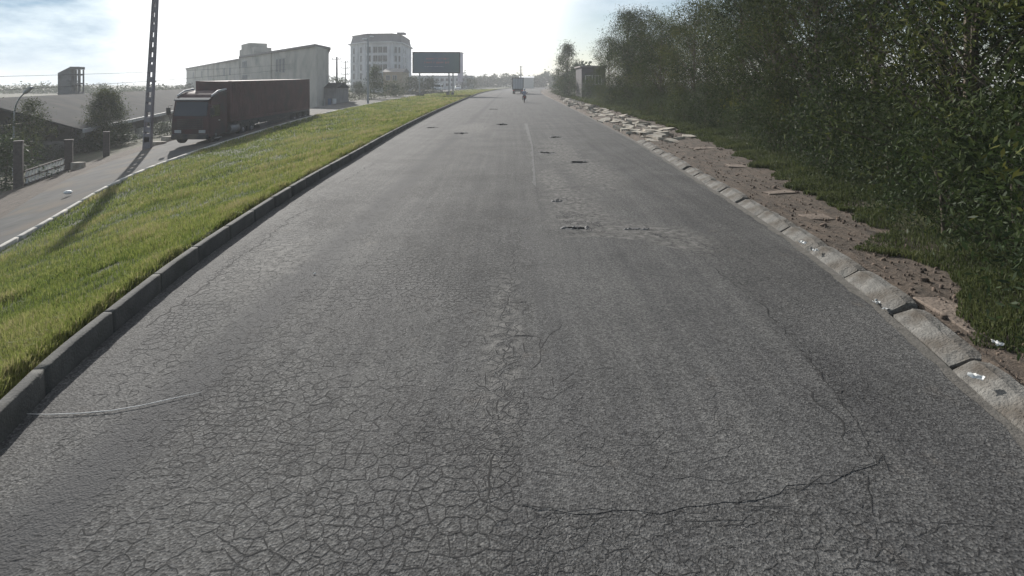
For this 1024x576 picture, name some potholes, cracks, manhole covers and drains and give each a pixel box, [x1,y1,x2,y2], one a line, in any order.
crack [0,160,1024,576]
